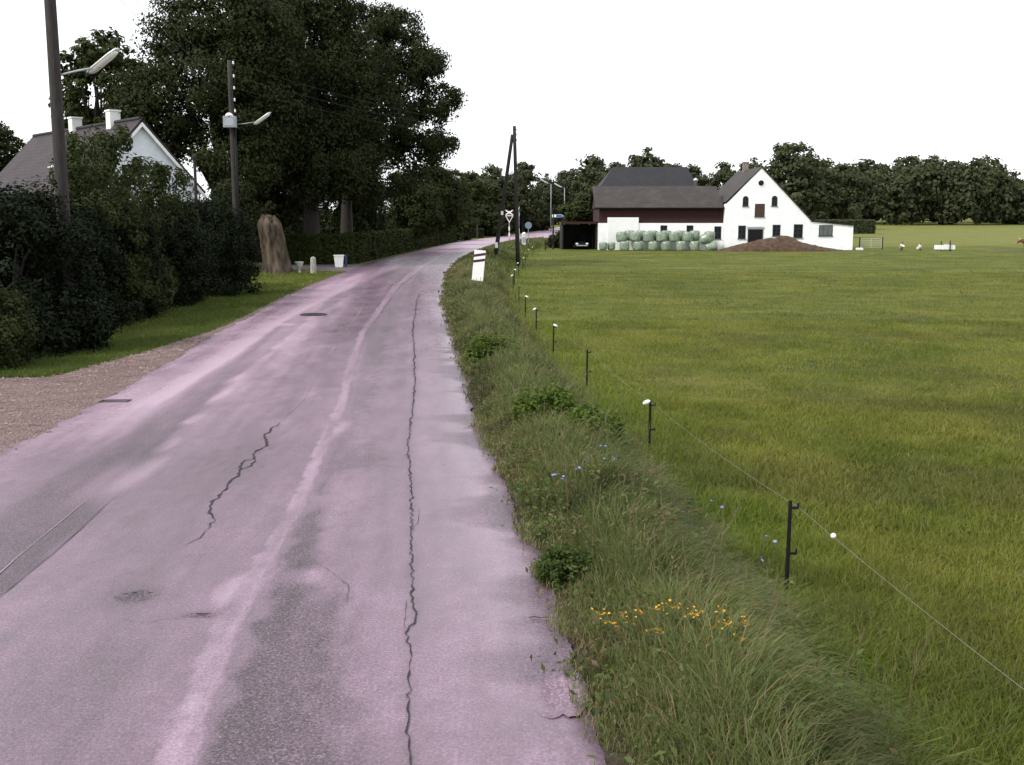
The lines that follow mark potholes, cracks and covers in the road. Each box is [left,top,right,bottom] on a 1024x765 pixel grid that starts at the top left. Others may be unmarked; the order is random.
pothole [108,588,166,604]
crack [187,422,280,544]
crack [404,294,420,765]
